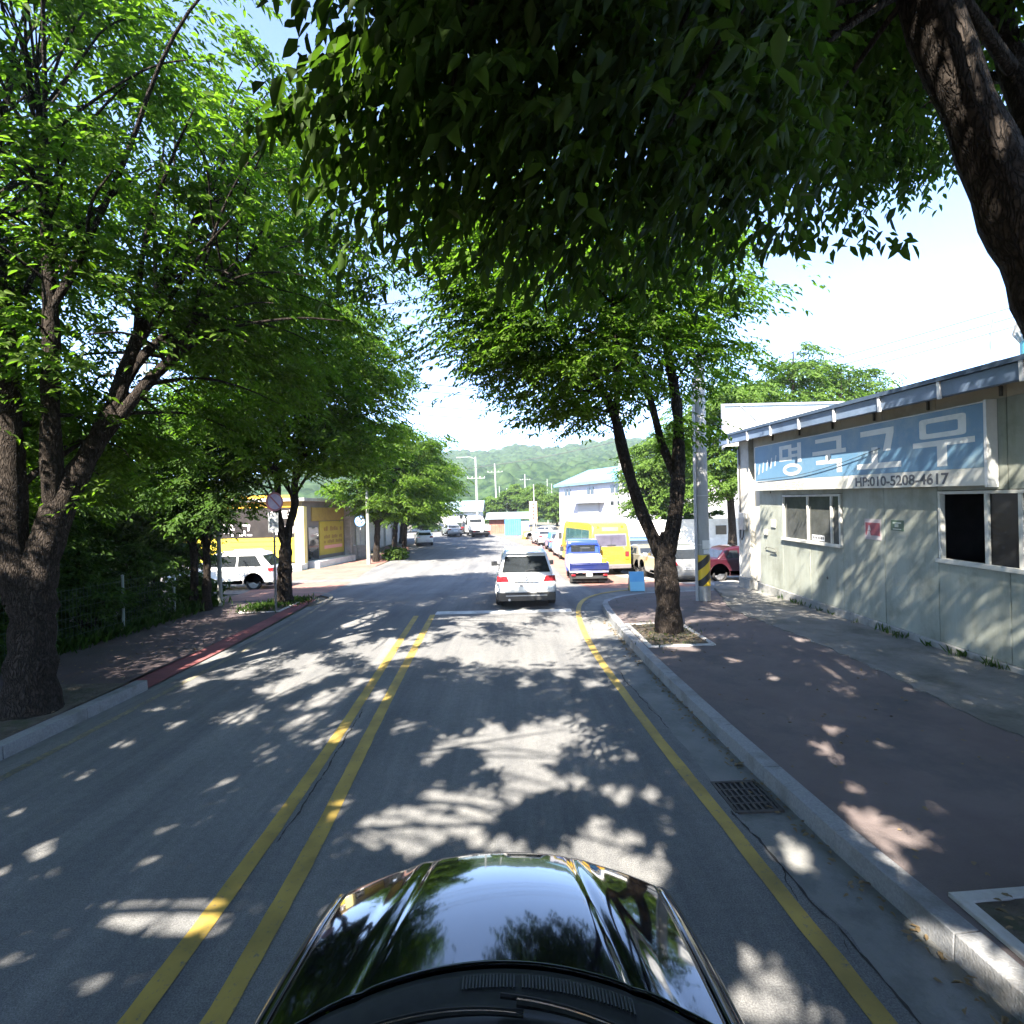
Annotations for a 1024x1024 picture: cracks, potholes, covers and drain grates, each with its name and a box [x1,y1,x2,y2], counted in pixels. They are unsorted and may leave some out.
crack [276,709,363,843]
crack [620,672,667,727]
drain grate [710,780,785,814]
crack [731,811,921,1024]
